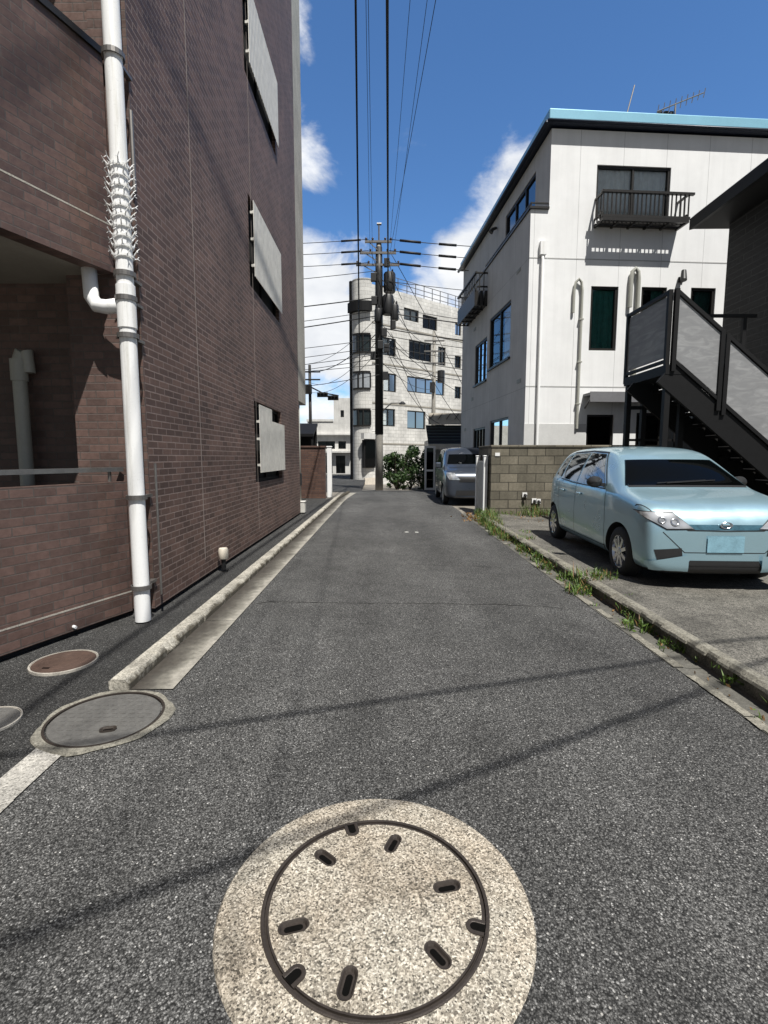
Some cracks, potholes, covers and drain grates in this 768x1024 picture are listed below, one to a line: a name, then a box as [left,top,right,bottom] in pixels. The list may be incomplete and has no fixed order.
manhole cover [27,650,99,676]
manhole cover [30,690,176,757]
manhole cover [213,799,536,1024]
manhole cover [0,706,23,731]
